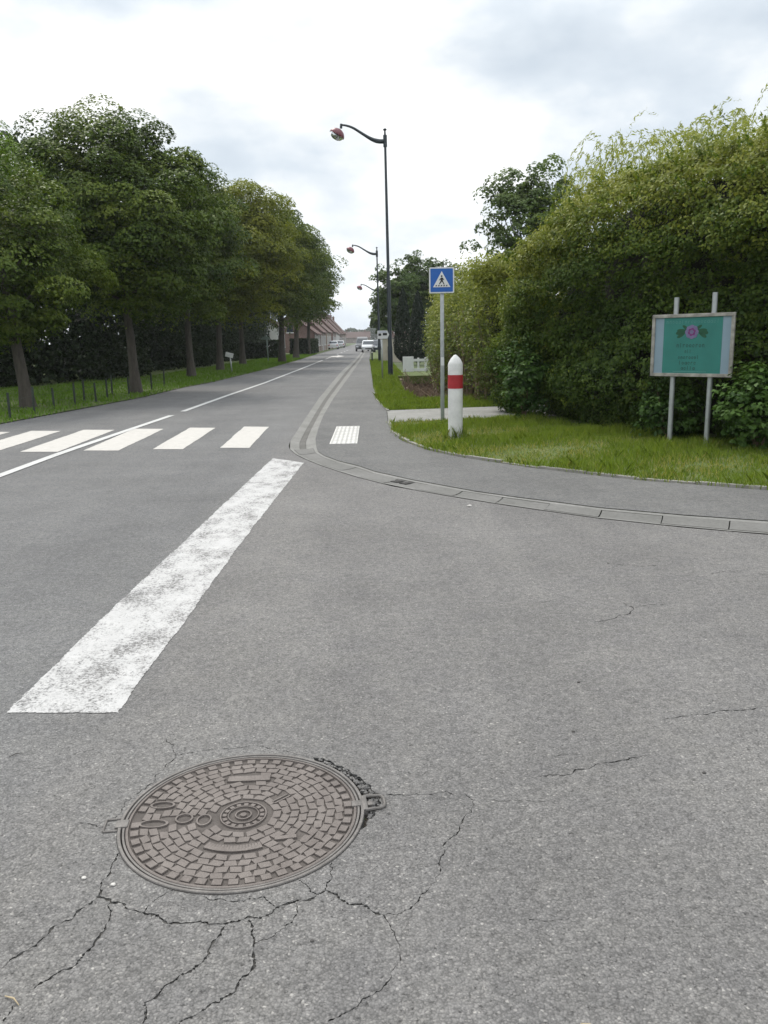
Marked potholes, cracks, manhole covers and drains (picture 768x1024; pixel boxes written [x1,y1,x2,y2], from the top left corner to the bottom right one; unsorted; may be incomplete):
crack [543,754,642,777]
crack [662,706,764,720]
crack [3,791,545,1024]
manhole cover [102,754,386,895]
